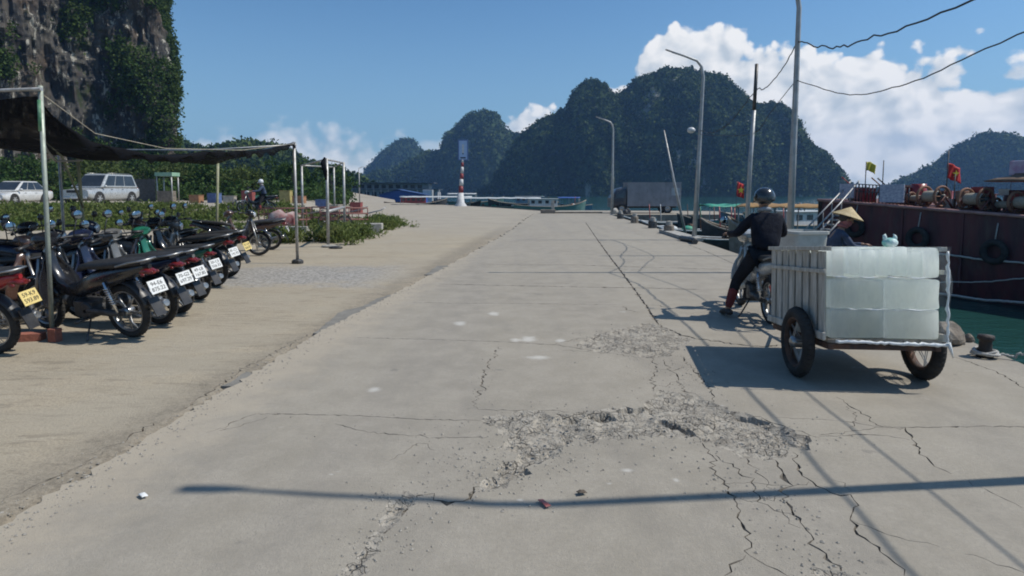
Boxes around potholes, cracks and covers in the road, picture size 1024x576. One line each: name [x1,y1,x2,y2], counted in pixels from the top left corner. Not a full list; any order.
crack [346,486,479,567]
crack [693,439,1024,576]
pothole [478,390,812,490]
pothole [574,323,695,358]
crack [472,348,562,412]
crack [213,413,485,460]
crack [586,223,815,437]
crack [841,399,1019,506]
